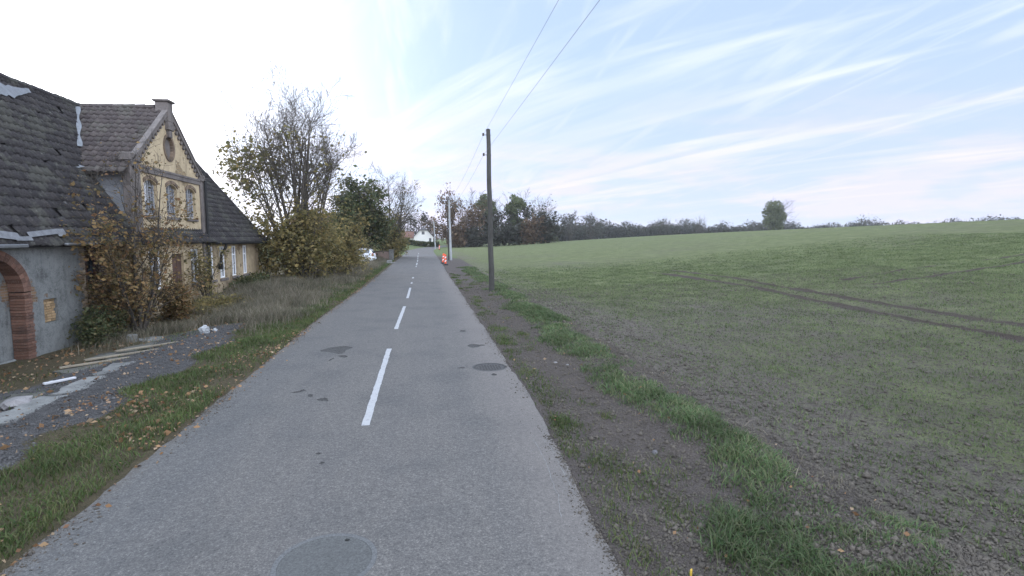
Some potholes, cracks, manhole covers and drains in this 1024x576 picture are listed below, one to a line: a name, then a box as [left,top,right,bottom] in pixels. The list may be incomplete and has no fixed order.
manhole cover [270,533,377,576]
manhole cover [472,363,507,371]
